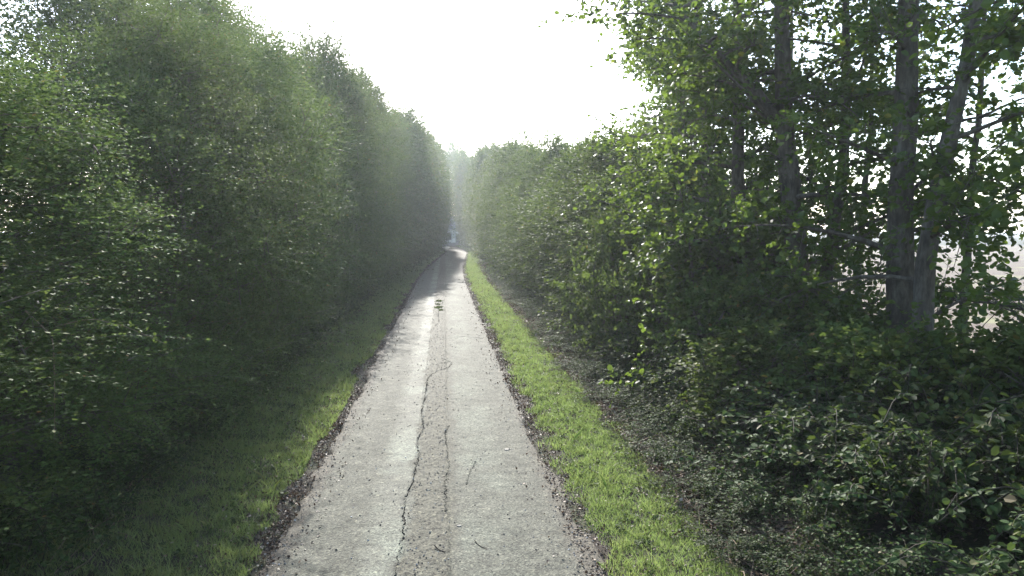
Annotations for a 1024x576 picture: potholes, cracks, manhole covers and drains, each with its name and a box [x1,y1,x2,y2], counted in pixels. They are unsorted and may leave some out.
crack [393,358,476,576]
